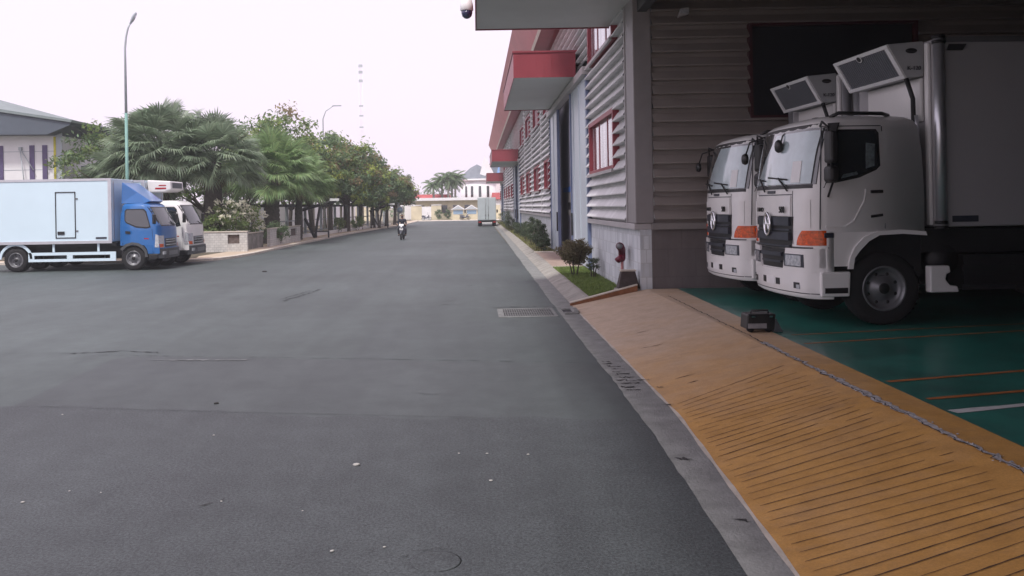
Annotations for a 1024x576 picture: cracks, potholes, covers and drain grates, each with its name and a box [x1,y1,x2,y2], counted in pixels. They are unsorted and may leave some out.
manhole cover [409,551,462,572]
drain grate [497,308,559,318]
drain grate [561,307,579,315]
